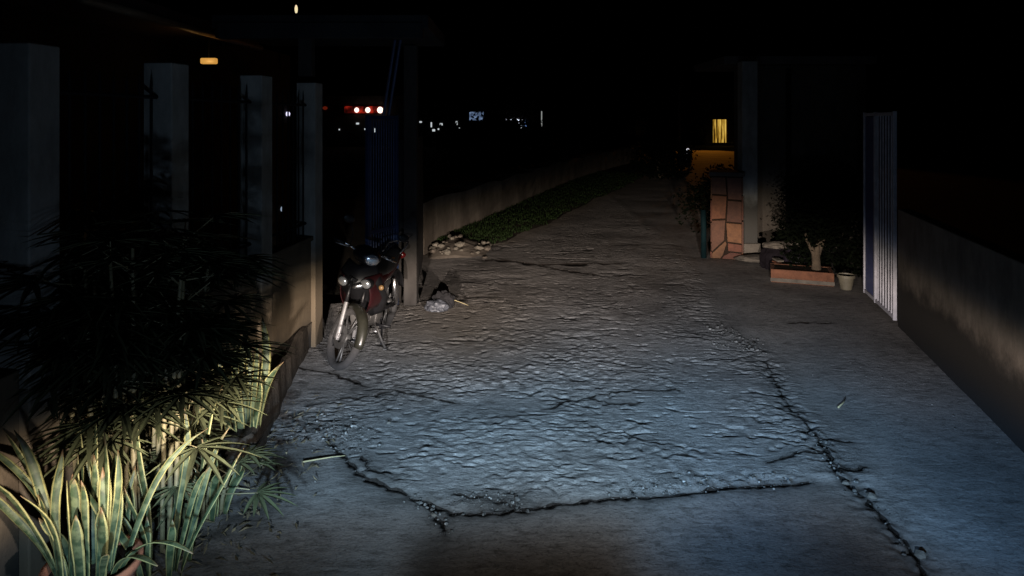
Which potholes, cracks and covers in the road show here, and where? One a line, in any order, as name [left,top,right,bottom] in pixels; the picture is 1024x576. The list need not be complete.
crack [485,259,620,275]
crack [766,363,926,576]
crack [329,443,810,535]
crack [299,367,457,404]
crack [551,389,680,409]
